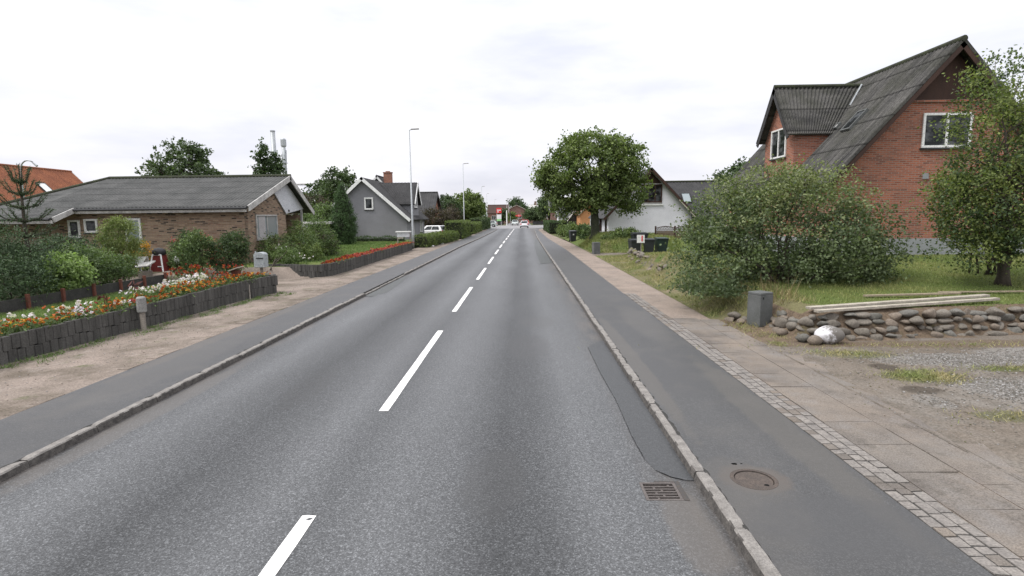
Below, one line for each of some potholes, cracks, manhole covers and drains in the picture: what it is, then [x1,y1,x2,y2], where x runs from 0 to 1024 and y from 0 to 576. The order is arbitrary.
drain grate [639,481,690,501]
manhole cover [730,469,779,490]
